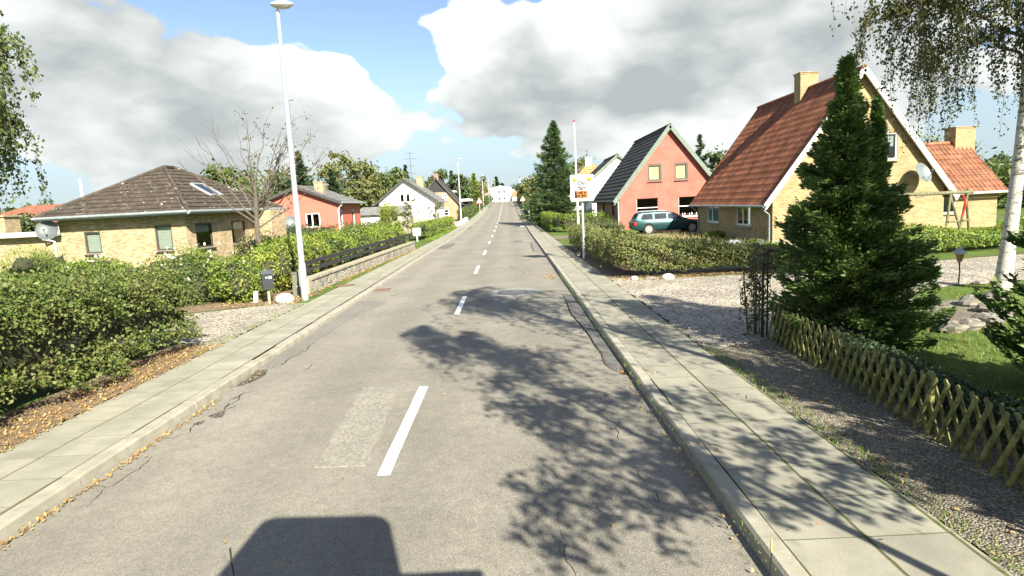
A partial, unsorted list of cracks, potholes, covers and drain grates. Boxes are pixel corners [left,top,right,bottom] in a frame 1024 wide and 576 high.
manhole cover [488,288,541,297]
pothole [236,369,268,387]
crack [167,391,254,439]
crack [562,295,622,375]
